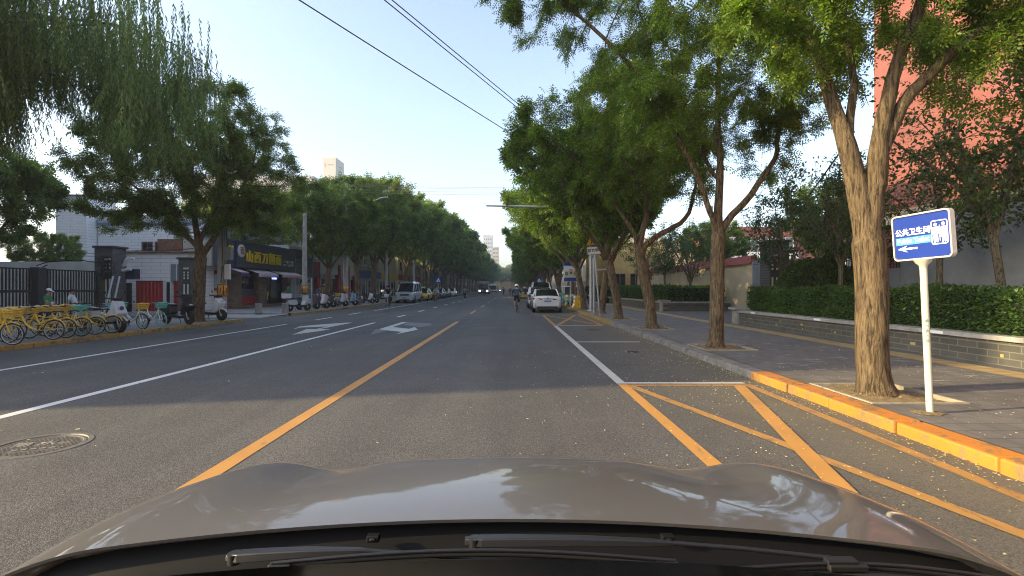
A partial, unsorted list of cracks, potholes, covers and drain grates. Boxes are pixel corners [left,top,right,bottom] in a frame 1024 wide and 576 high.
manhole cover [0,432,95,460]
